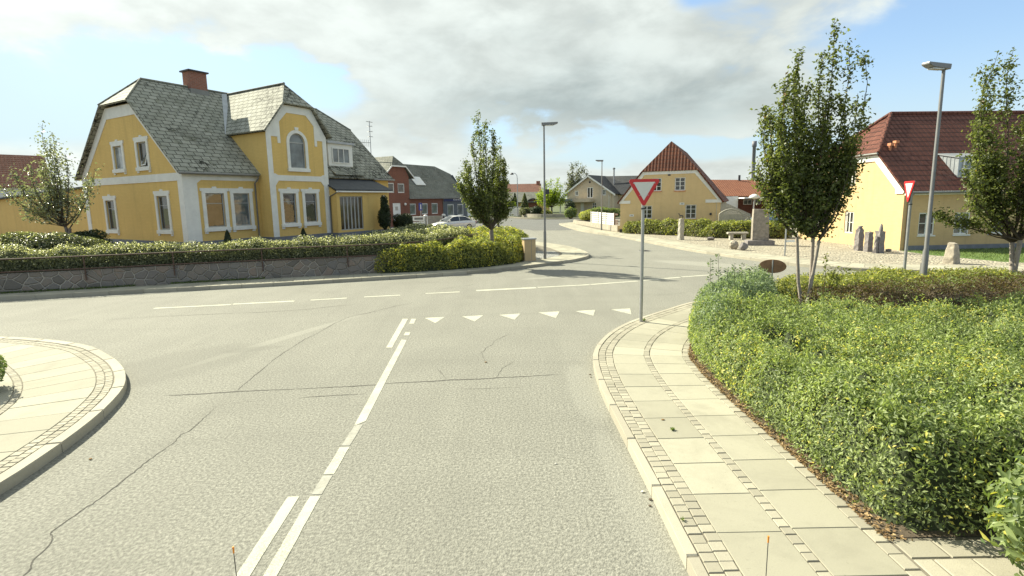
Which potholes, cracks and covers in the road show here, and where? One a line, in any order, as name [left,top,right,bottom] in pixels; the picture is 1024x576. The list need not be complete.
crack [23,305,561,576]
